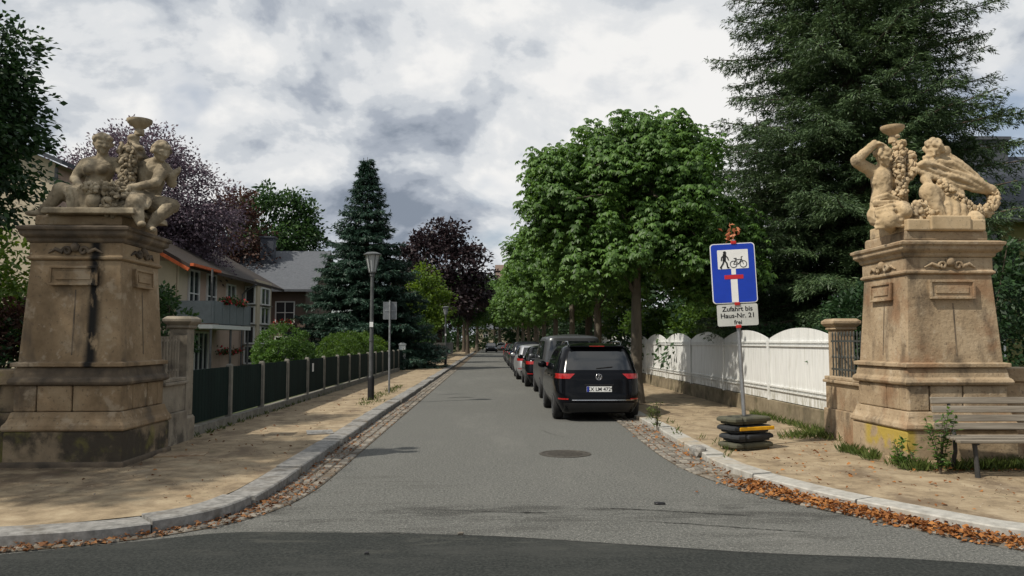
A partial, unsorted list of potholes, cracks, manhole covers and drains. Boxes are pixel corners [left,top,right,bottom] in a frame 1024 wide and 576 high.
manhole cover [539,450,591,458]
